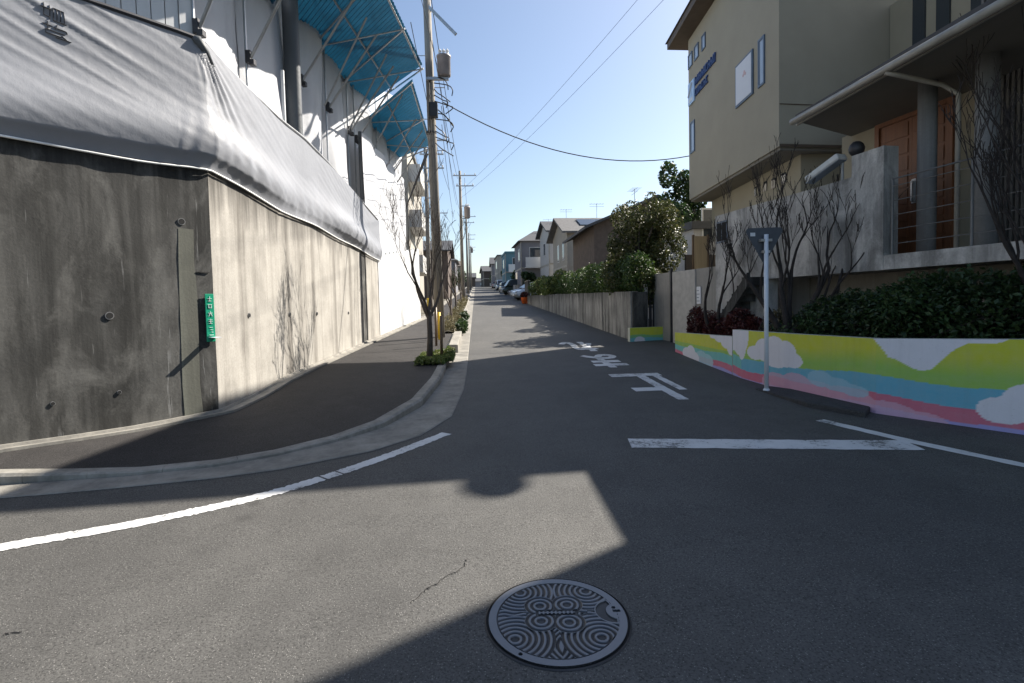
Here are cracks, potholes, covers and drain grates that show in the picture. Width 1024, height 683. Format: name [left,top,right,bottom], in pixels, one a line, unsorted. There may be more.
crack [410,558,468,603]
manhole cover [485,579,632,671]
